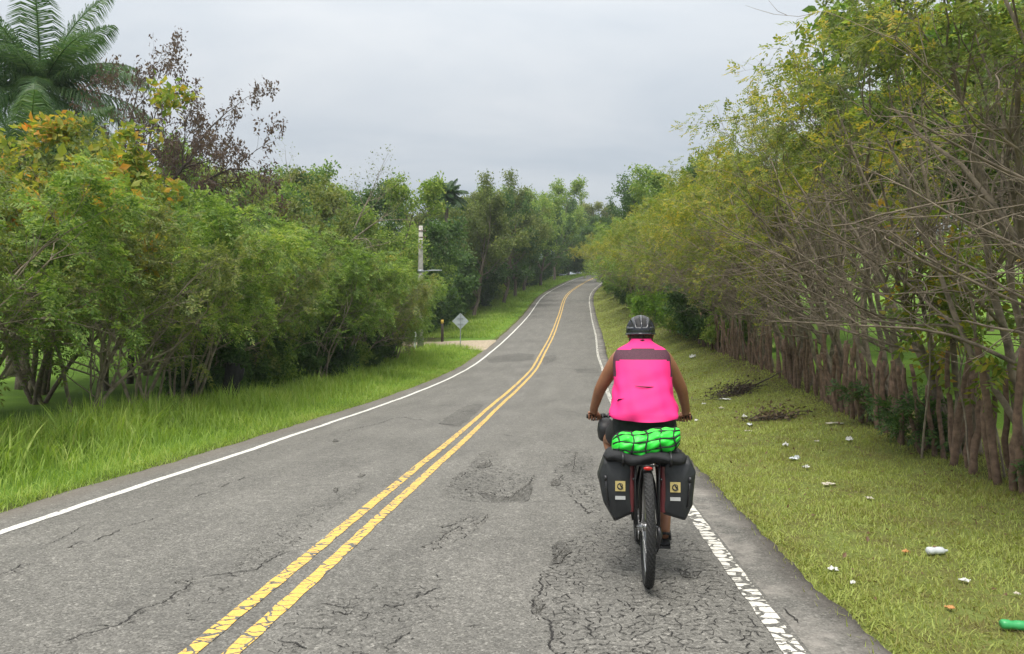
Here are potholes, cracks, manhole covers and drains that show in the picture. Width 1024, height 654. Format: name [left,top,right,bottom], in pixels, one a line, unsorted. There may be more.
pothole [552,541,572,564]
pothole [481,484,533,502]
crack [269,574,445,654]
crack [423,450,601,550]
crack [0,482,364,647]
crack [525,516,776,654]
